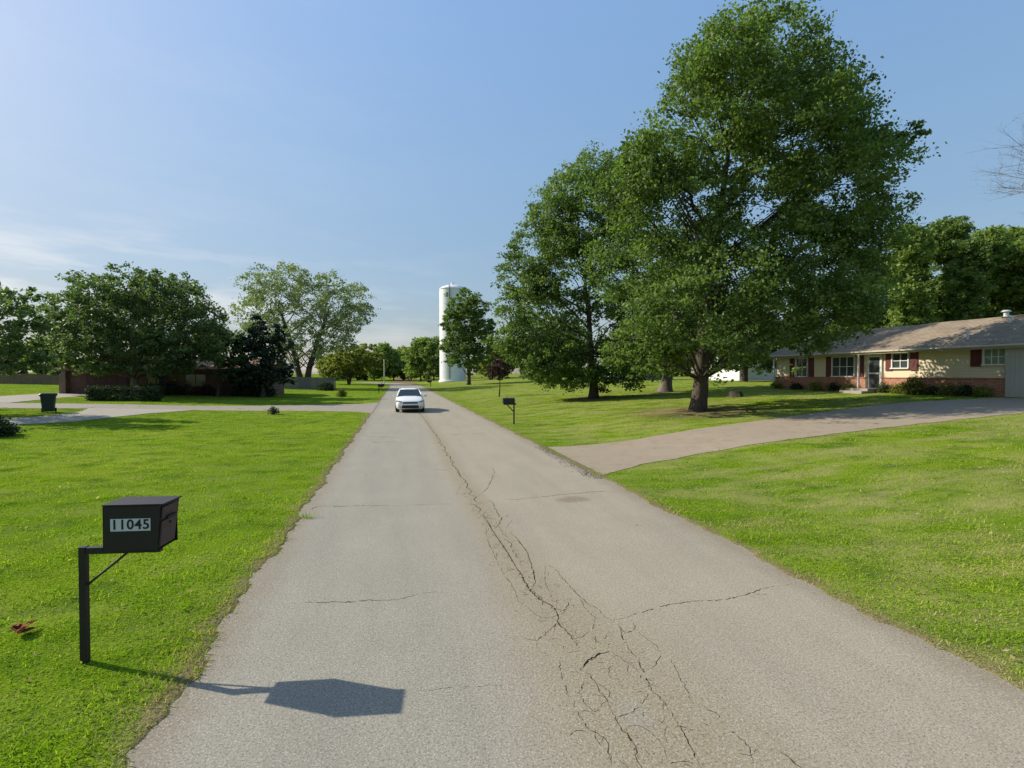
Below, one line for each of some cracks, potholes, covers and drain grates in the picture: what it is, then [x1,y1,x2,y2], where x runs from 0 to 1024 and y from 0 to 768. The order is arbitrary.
crack [415,409,802,768]
